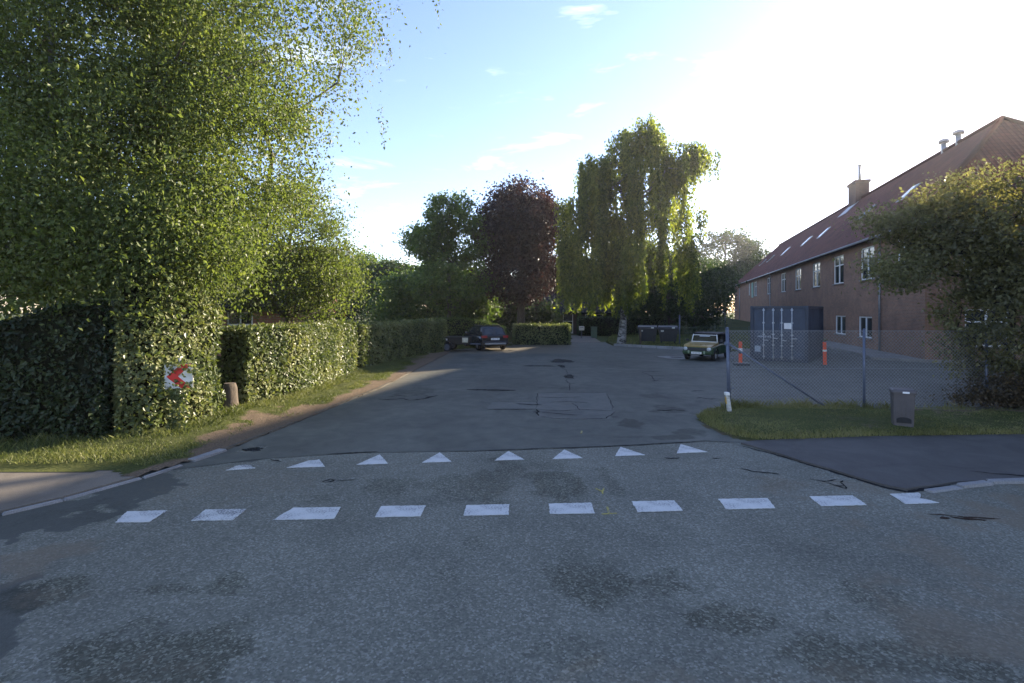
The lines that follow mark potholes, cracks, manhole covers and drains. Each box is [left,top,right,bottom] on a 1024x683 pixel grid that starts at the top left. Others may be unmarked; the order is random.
crack [740,446,949,492]
crack [467,369,613,419]
